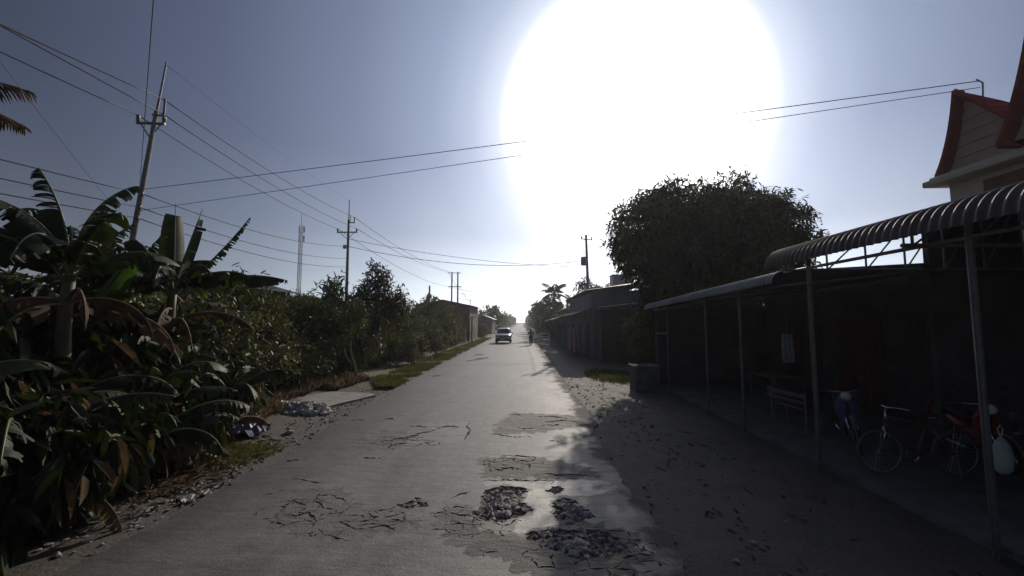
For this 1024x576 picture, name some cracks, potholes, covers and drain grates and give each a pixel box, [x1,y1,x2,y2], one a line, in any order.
crack [255,455,589,557]
pothole [471,486,534,523]
pothole [551,497,596,526]
pothole [526,527,631,561]
